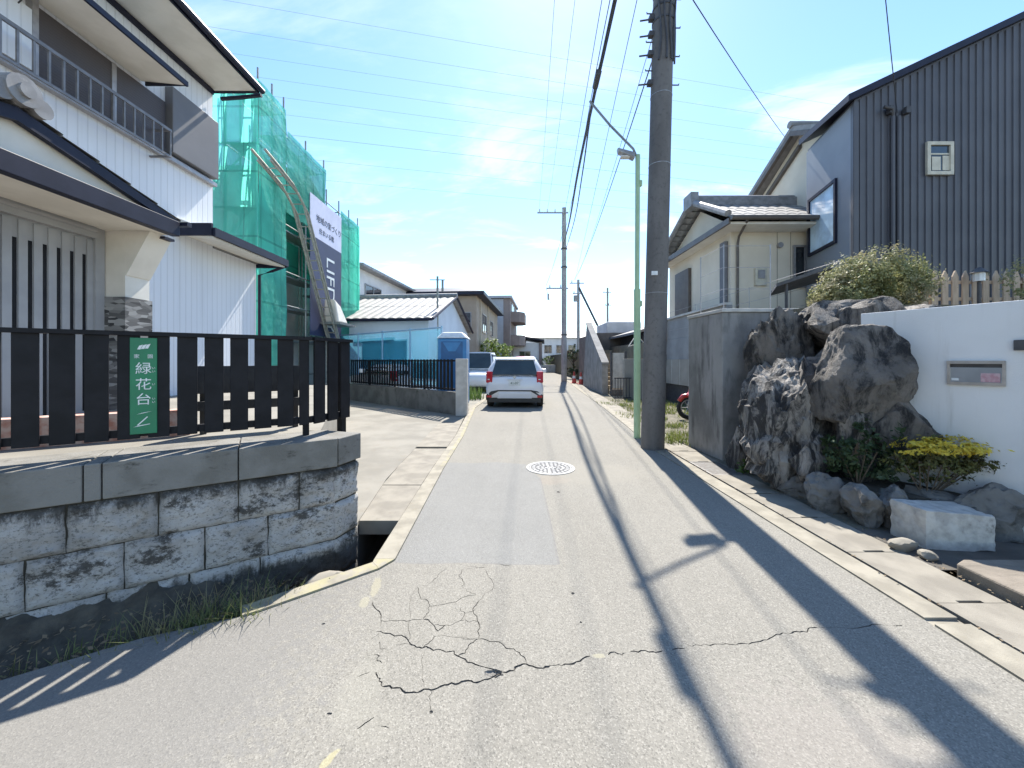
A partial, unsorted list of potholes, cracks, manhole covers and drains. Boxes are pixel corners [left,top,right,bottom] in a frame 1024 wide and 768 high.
manhole cover [526,461,575,475]
crack [363,571,902,710]
